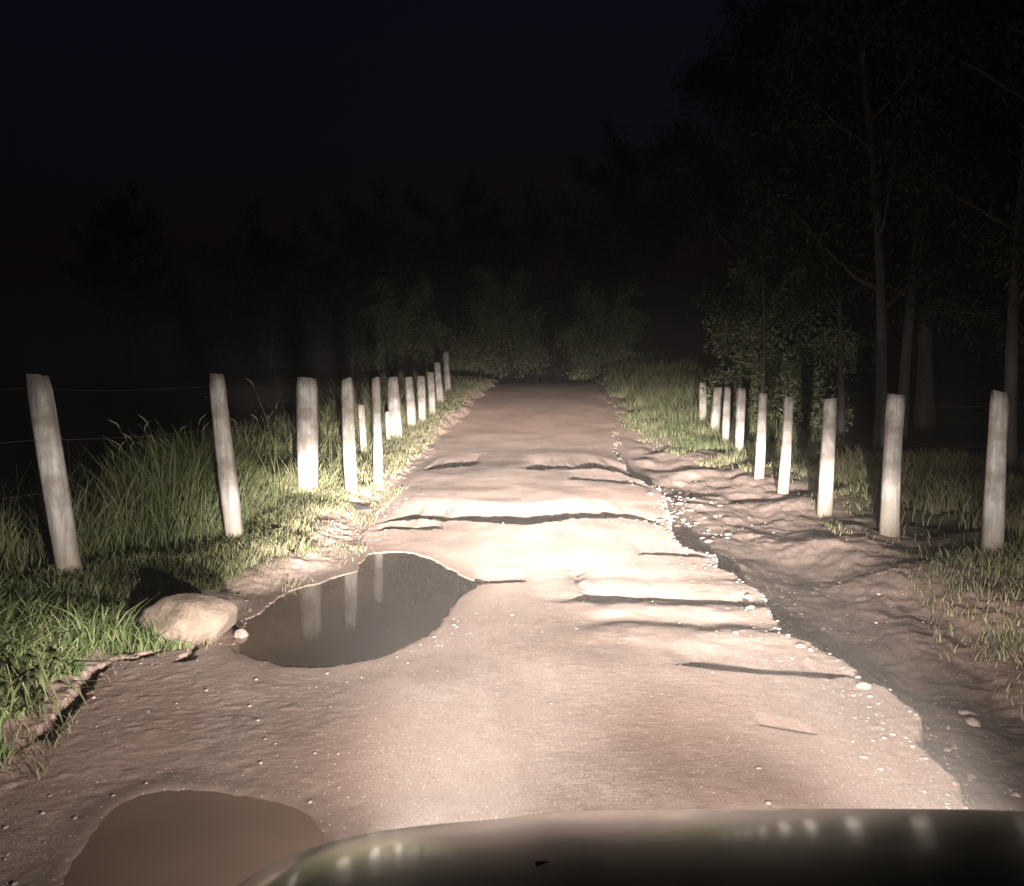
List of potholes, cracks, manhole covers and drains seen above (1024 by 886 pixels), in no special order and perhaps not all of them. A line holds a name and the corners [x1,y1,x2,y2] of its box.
crack [371,518,667,532]
crack [677,664,858,679]
pothole [231,551,484,668]
crack [644,598,766,607]
pothole [55,785,336,886]
